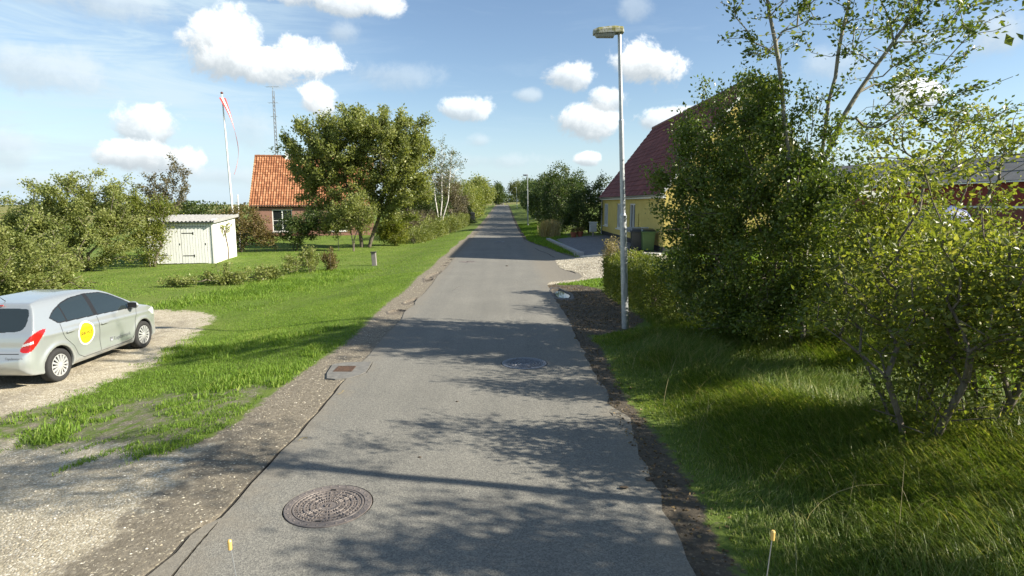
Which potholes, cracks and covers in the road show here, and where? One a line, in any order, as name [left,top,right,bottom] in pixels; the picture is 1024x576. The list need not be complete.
manhole cover [502,357,547,370]
manhole cover [283,485,372,528]
